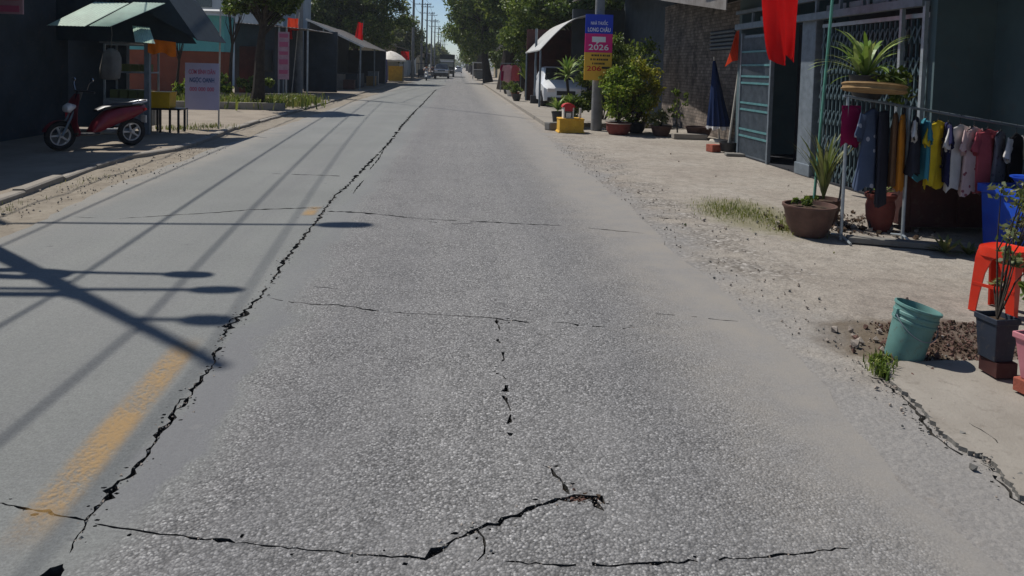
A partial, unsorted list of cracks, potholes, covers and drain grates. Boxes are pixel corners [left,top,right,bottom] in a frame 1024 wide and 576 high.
crack [868,375,1024,505]
crack [1,90,850,567]
